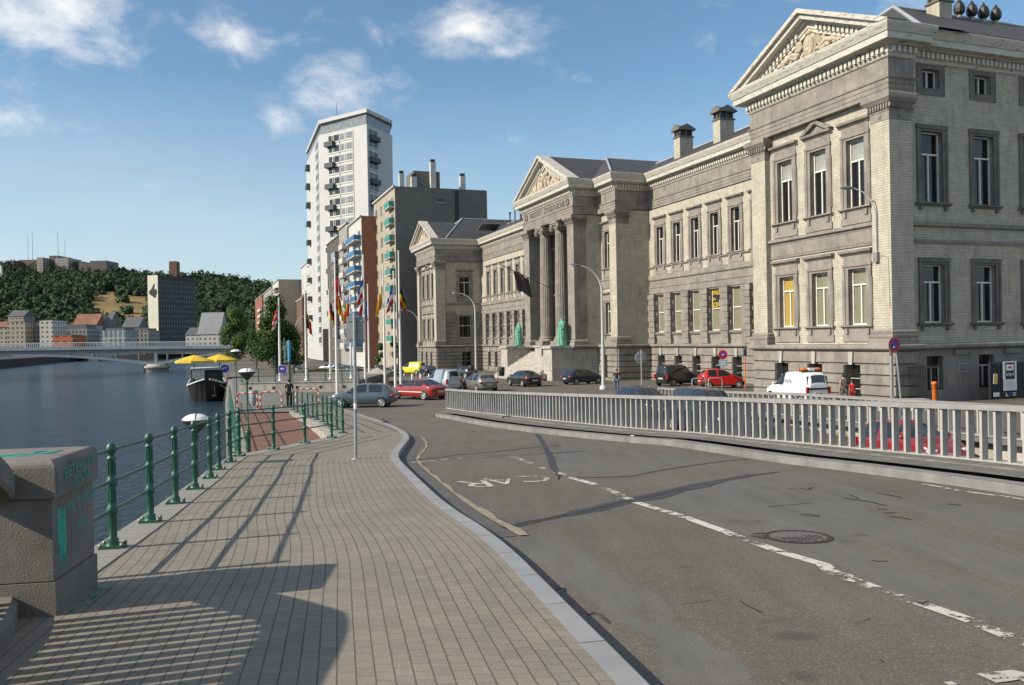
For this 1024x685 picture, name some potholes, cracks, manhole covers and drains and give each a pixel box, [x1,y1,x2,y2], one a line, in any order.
crack [848,493,908,519]
manhole cover [750,530,834,544]
